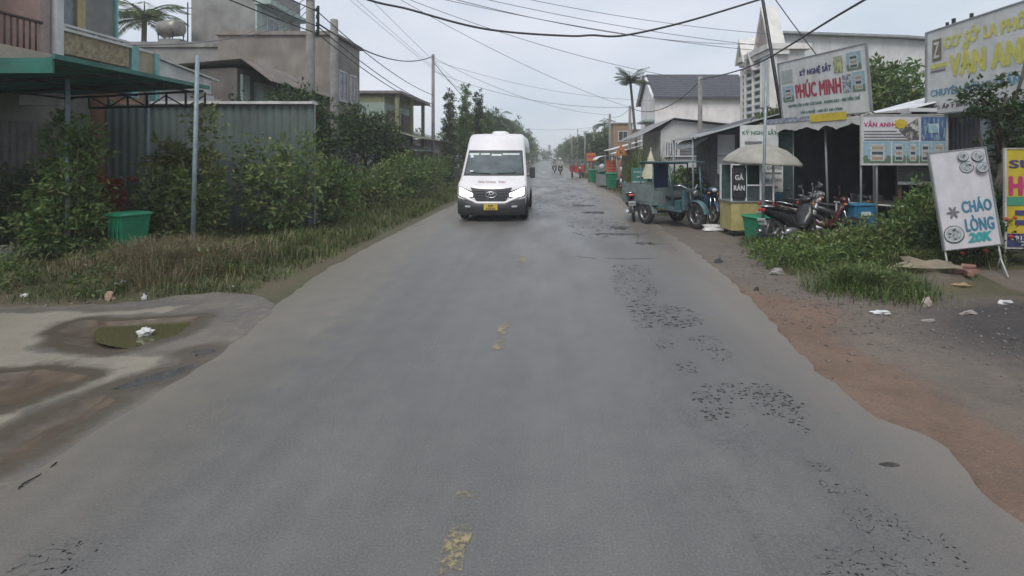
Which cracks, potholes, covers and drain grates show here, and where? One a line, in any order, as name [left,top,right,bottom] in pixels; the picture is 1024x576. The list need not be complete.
pothole [58,315,202,351]
crack [8,542,102,576]
crack [811,462,967,576]
crack [18,462,58,490]
